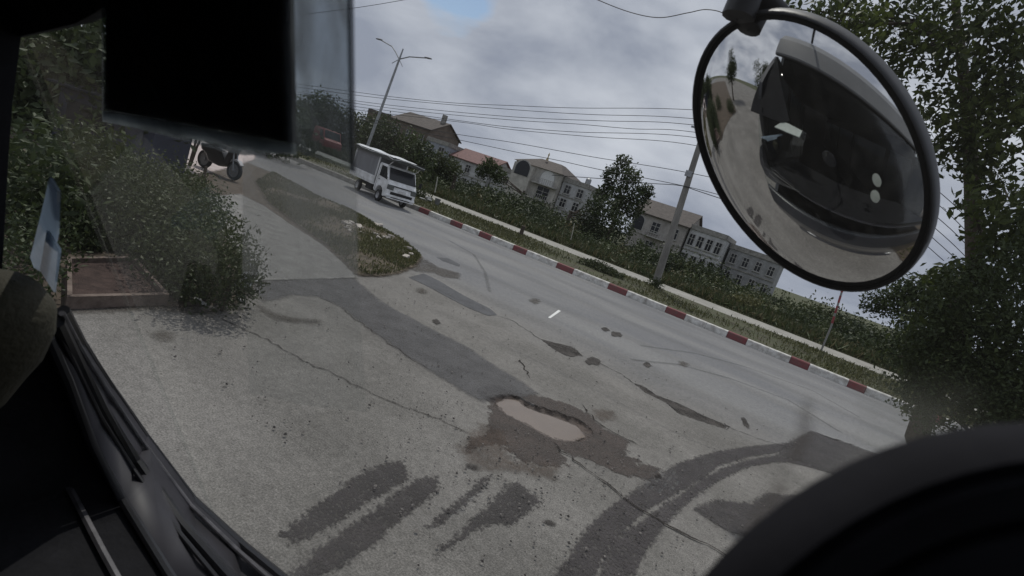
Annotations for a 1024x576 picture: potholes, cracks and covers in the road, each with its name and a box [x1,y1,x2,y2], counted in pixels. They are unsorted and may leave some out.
crack [553,441,723,553]
crack [221,318,462,430]
pothole [487,394,594,442]
